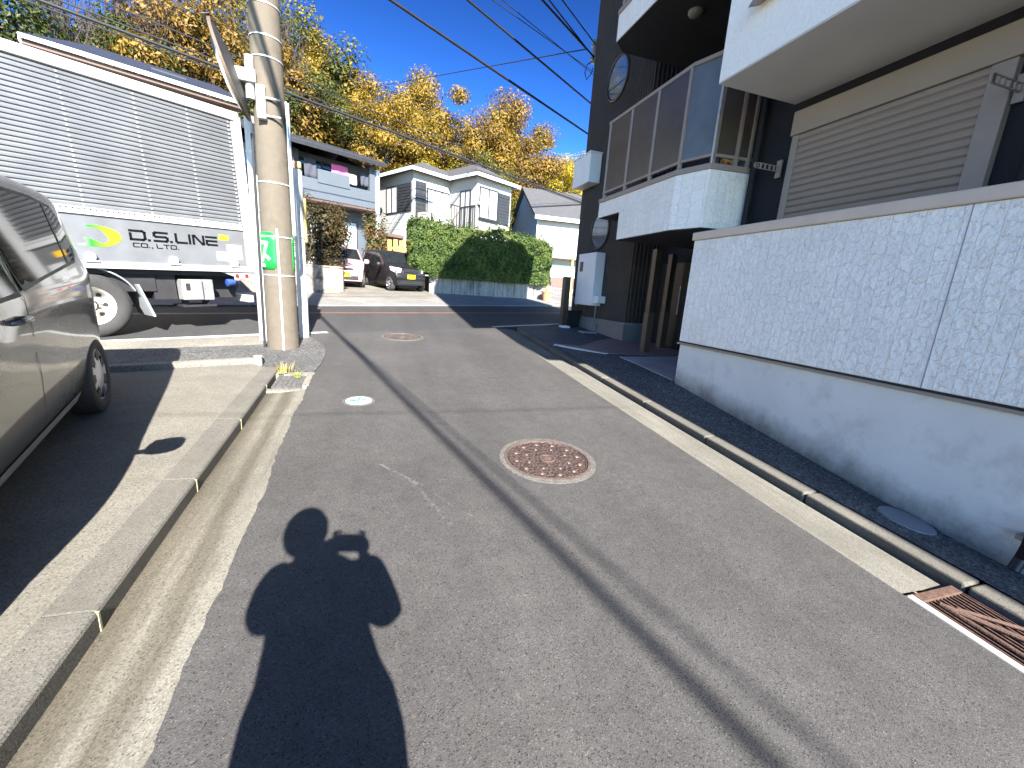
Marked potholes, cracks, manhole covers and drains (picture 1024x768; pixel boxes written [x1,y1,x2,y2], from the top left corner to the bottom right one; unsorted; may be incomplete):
utility cover [872,504,943,539]
manhole cover [381,333,424,341]
drain grate [906,585,1024,674]
utility cover [342,396,375,406]
manhole cover [499,438,596,484]
